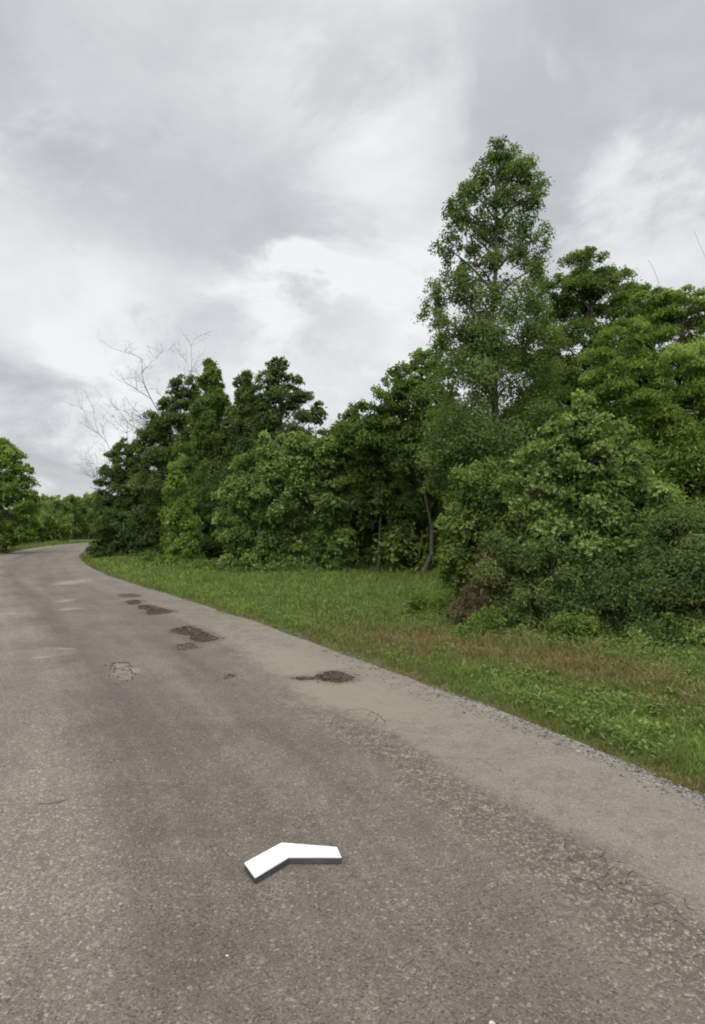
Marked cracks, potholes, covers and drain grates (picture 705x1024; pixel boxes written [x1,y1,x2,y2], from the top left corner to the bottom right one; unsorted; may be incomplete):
pothole [167,625,224,644]
pothole [133,604,174,615]
pothole [166,642,203,650]
pothole [104,661,146,684]
pothole [283,670,360,686]
crack [533,832,705,960]
